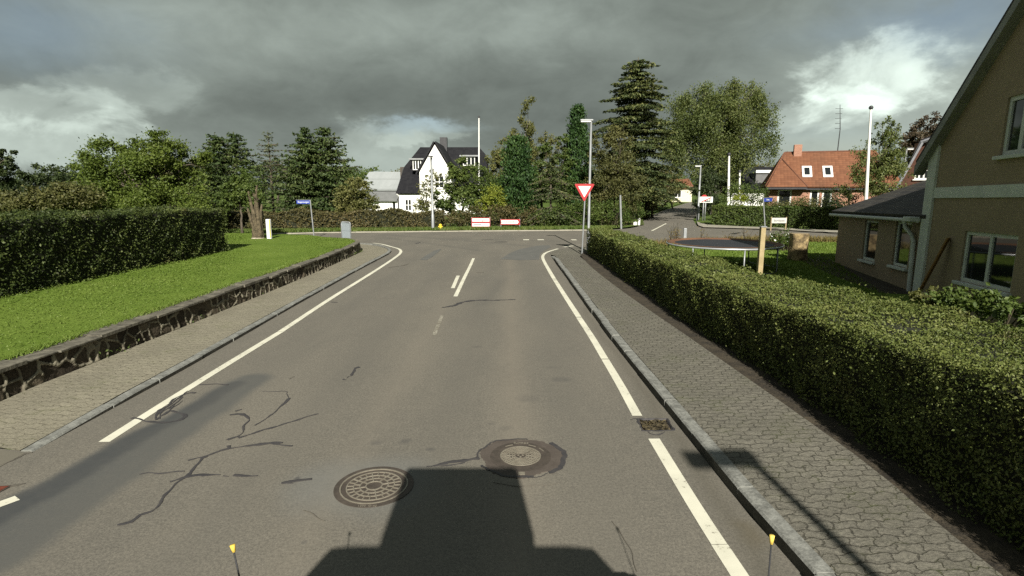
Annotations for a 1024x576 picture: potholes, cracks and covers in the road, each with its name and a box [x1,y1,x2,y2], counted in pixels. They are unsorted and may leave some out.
crack [443,299,516,308]
drain grate [636,418,675,431]
manhole cover [333,466,414,508]
manhole cover [476,438,568,479]
